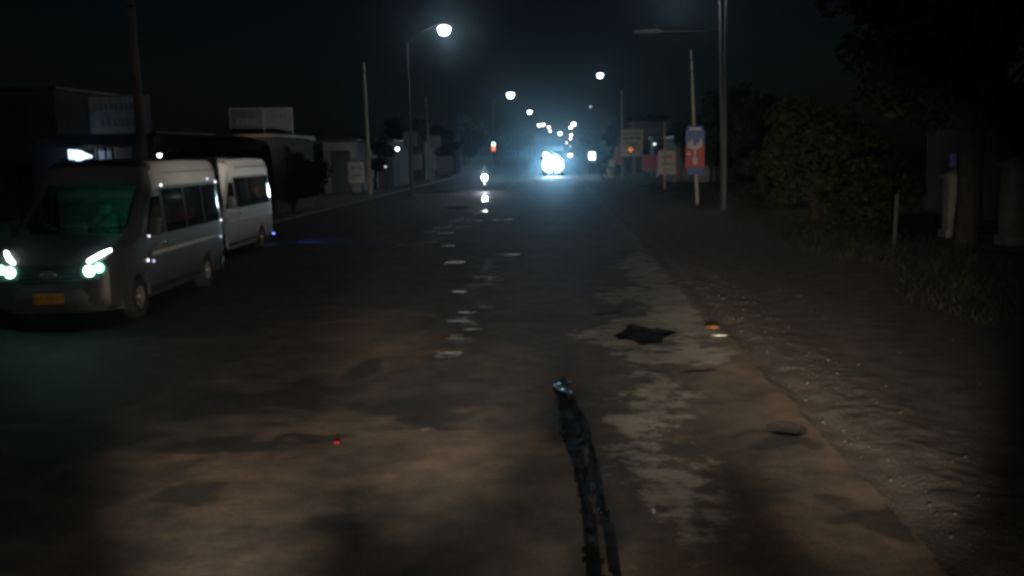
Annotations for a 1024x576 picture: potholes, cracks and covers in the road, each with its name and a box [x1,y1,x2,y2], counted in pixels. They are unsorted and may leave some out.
crack [553,377,622,576]
pothole [766,421,809,437]
pothole [613,325,679,345]
